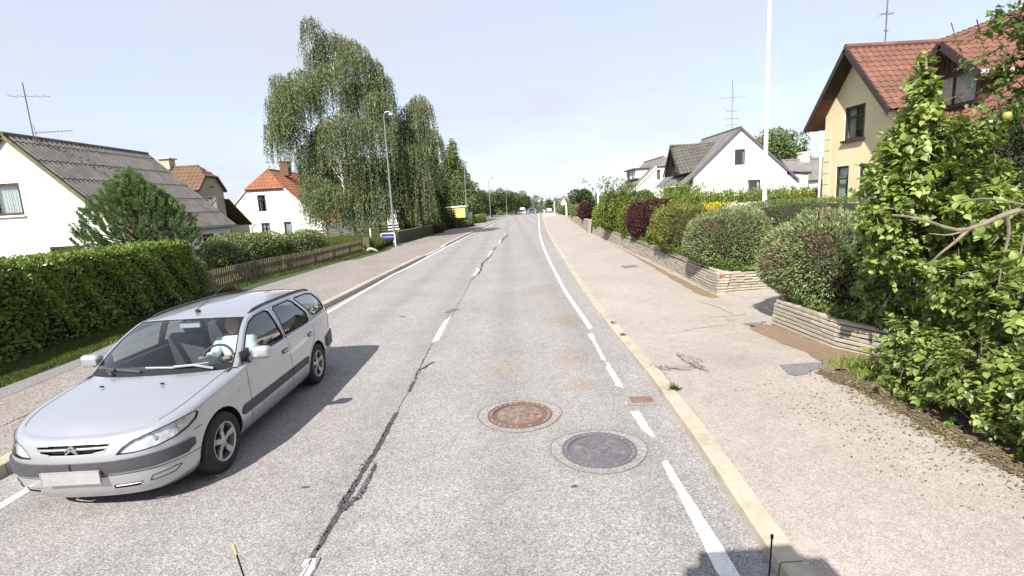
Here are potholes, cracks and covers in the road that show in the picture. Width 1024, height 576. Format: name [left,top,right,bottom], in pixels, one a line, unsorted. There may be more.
crack [397,344,435,412]
manhole cover [550,430,649,475]
crack [651,353,707,384]
manhole cover [478,400,562,433]
crack [445,235,508,318]
